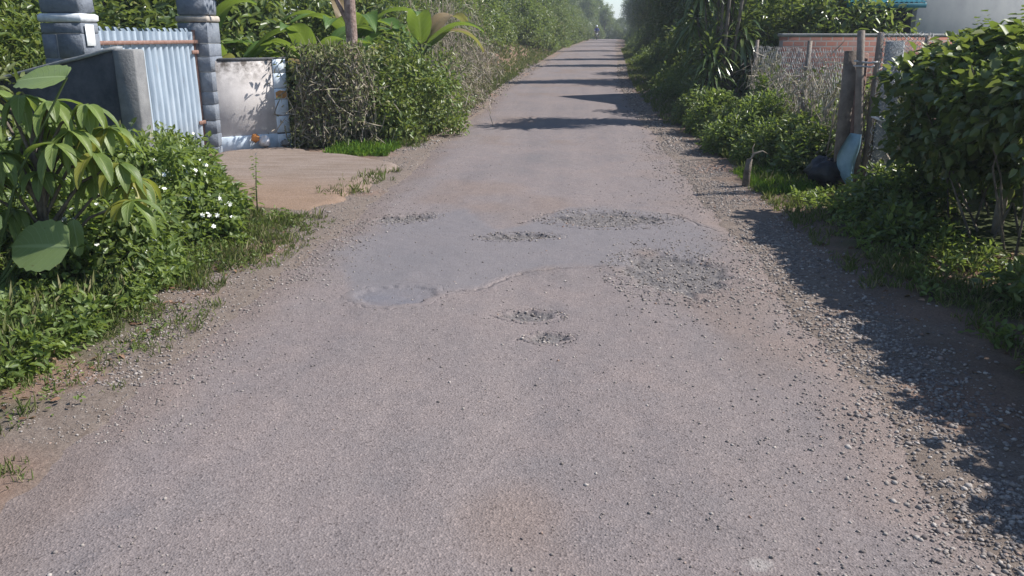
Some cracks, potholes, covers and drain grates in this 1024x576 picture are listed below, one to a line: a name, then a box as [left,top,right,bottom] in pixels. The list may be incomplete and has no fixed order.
pothole [461,232,566,242]
pothole [526,210,690,230]
pothole [340,283,447,310]
pothole [360,213,446,225]
pothole [516,331,576,346]
pothole [603,249,755,312]
pothole [489,309,562,325]
